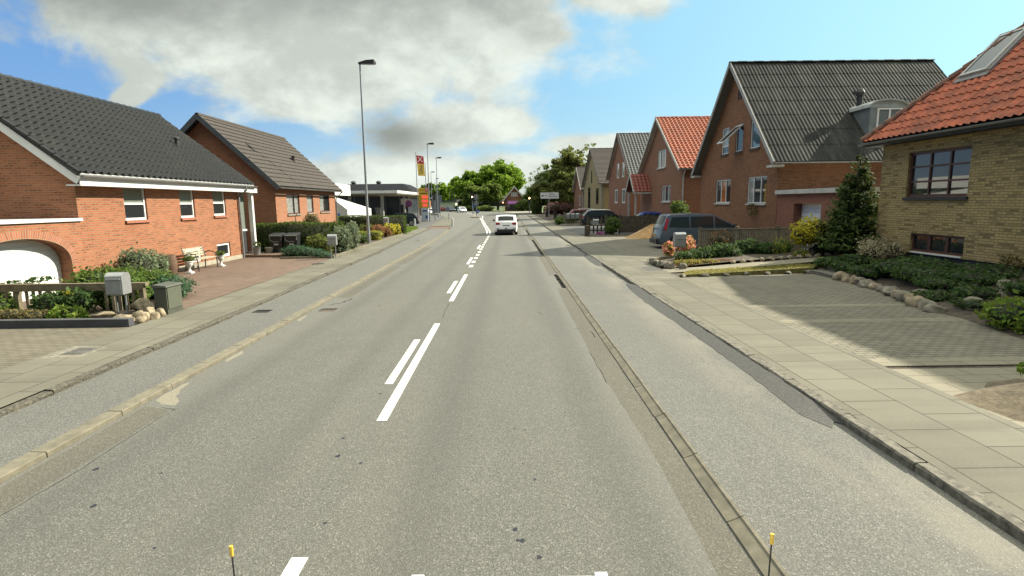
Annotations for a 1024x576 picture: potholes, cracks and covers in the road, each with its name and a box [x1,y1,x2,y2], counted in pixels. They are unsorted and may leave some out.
manhole cover [59,347,101,355]
